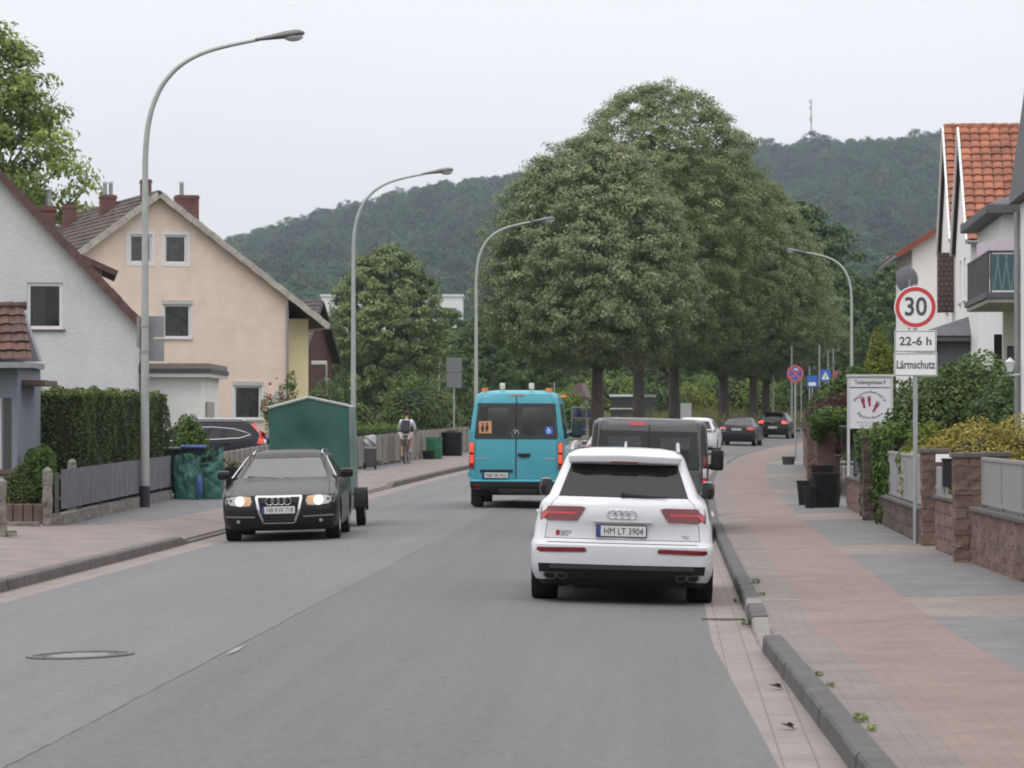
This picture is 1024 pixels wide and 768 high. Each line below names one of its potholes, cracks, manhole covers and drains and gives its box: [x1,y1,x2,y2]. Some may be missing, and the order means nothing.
manhole cover [26,650,135,660]
